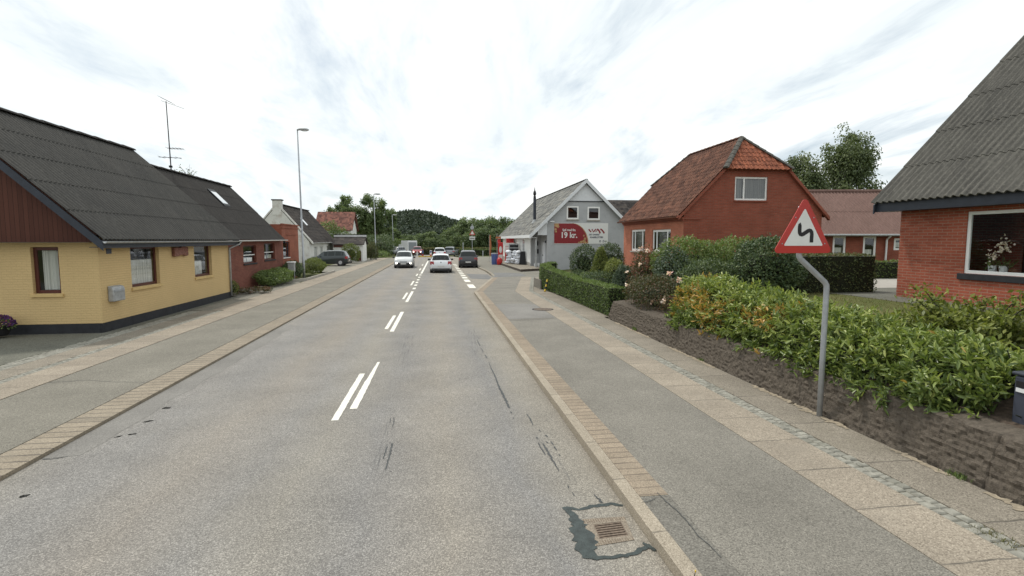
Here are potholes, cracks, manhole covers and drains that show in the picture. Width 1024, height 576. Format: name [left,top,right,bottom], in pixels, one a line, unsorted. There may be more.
crack [527,414,575,496]
crack [383,417,395,469]
drain grate [583,517,634,546]
crack [644,493,721,557]
